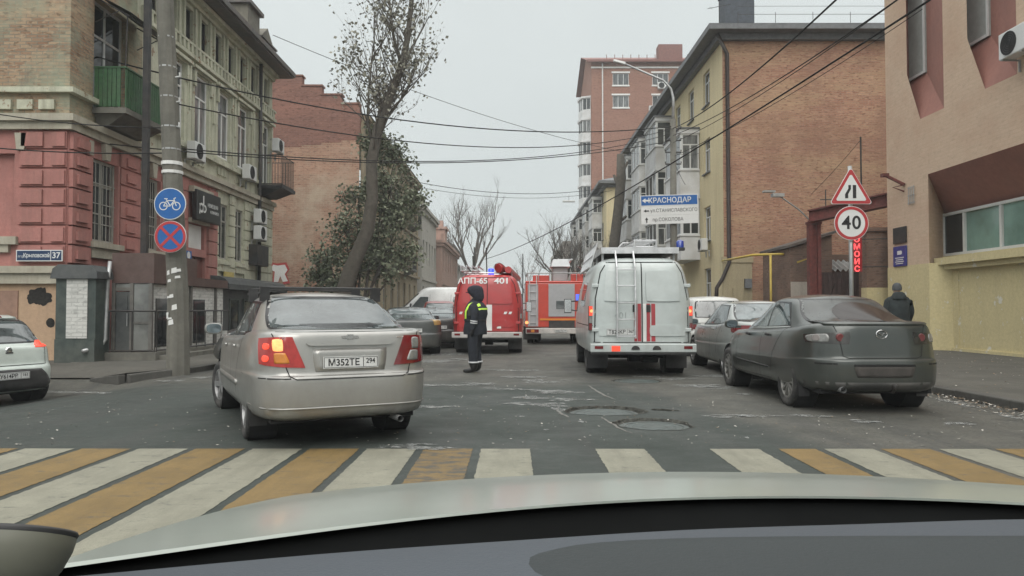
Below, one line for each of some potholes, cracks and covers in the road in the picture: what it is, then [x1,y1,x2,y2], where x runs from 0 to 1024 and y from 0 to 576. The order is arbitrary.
manhole cover [619,421,690,430]
